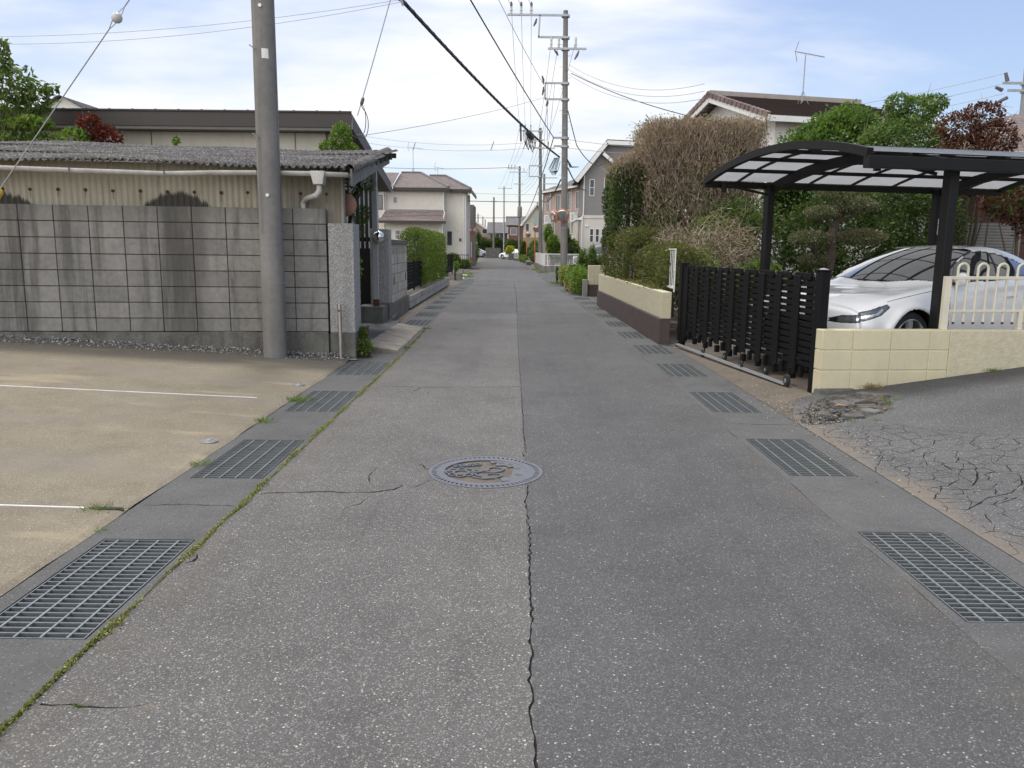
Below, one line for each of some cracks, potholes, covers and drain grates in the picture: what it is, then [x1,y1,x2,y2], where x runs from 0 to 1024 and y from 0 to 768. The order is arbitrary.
drain grate [338,362,389,375]
drain grate [859,532,1024,623]
pothole [798,392,899,427]
drain grate [287,391,357,412]
drain grate [0,539,193,640]
crack [263,464,429,508]
crack [524,484,539,768]
drain grate [192,440,304,479]
manhole cover [428,456,543,488]
drain grate [656,364,707,377]
crack [824,424,1024,556]
crack [517,317,527,458]
